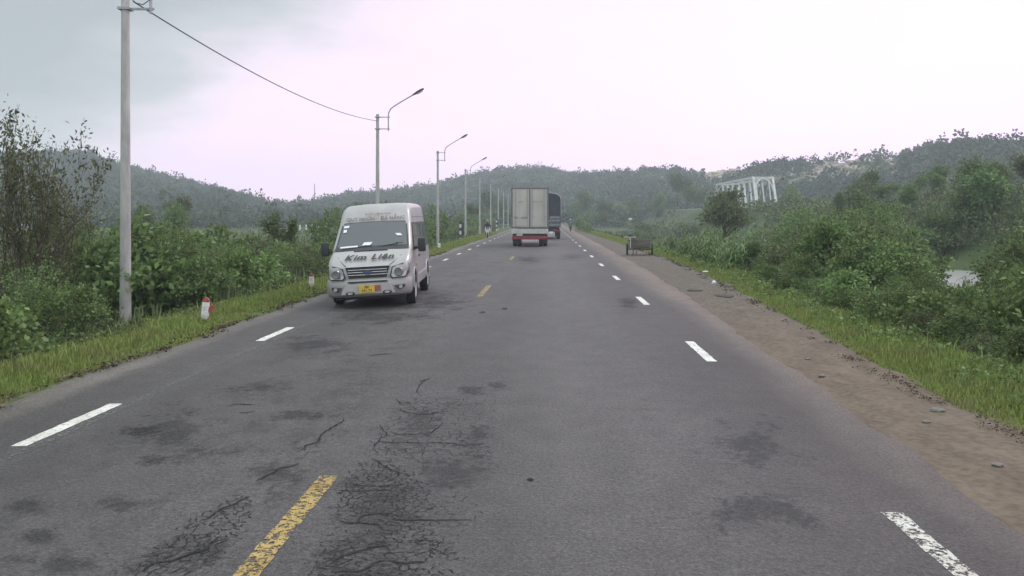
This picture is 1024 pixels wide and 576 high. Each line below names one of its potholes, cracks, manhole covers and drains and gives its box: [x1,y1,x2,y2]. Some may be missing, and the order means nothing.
crack [207,418,344,519]
crack [330,543,428,572]
crack [349,378,482,491]
crack [339,513,473,525]
crack [144,536,219,572]
